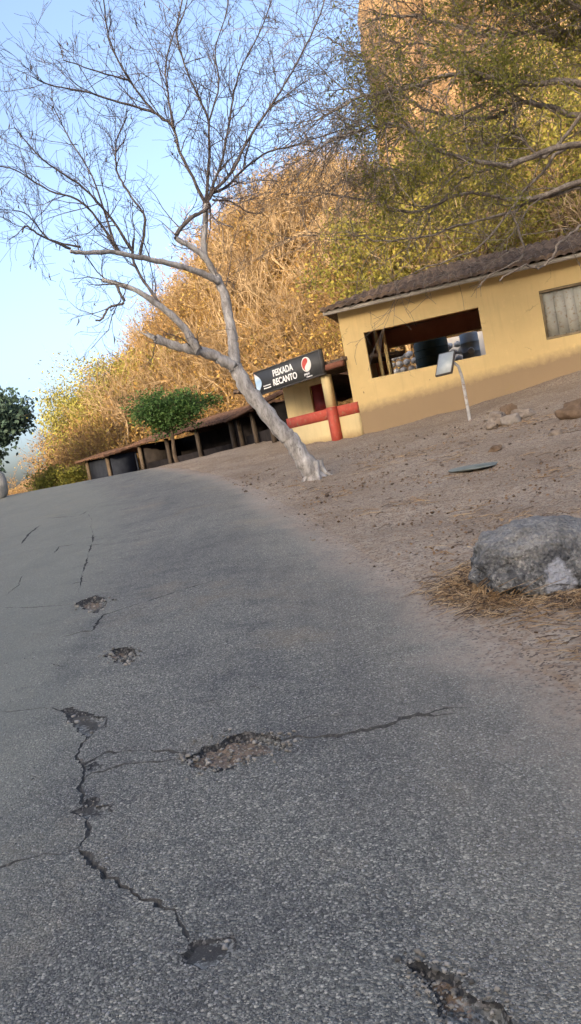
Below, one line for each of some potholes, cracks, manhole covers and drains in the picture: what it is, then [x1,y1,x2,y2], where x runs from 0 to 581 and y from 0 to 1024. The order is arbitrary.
pothole [75,595,107,613]
crack [282,707,468,741]
crack [0,707,190,942]
crack [7,508,98,587]
pothole [105,647,136,664]
pothole [185,732,286,773]
pothole [179,934,237,970]
pothole [59,707,108,740]
pothole [405,961,513,1024]
